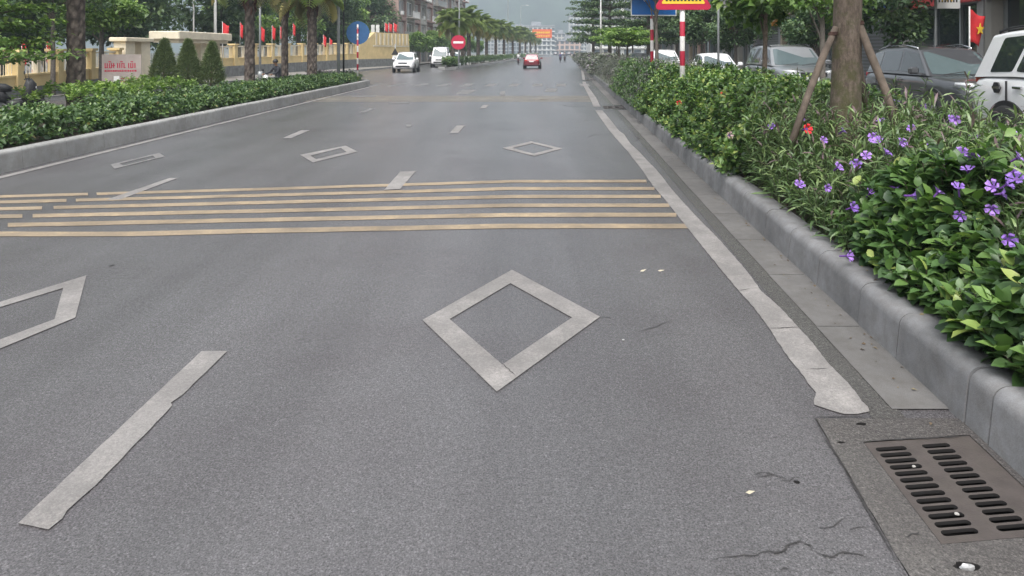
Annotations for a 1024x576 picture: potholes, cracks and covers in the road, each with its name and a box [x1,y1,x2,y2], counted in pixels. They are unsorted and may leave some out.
drain grate [863,435,1024,576]
crack [714,518,868,573]
